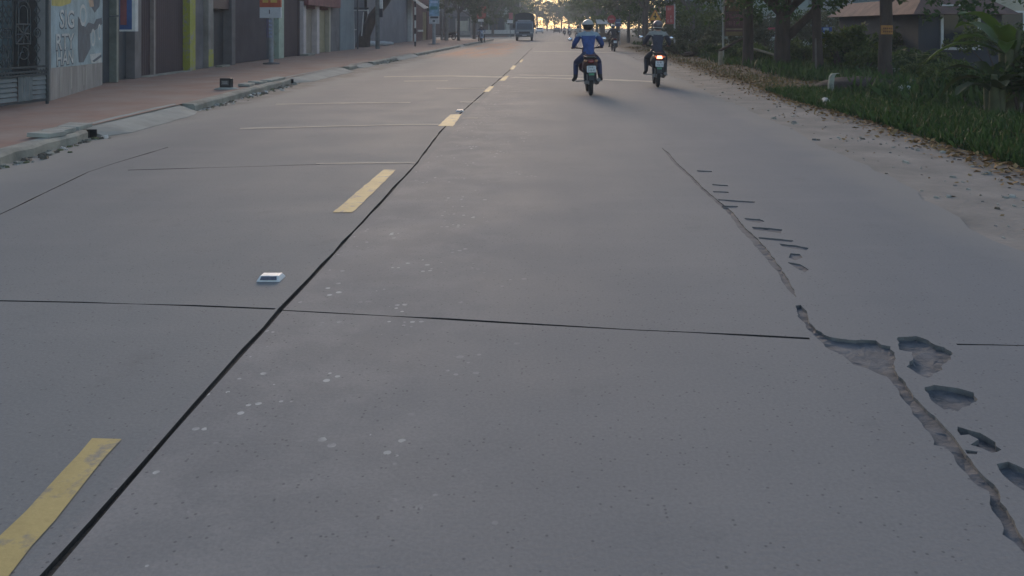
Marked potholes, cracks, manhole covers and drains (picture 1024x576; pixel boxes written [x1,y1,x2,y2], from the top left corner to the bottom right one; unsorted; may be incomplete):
pothole [997,462,1024,490]
pothole [957,427,1001,453]
pothole [897,336,953,377]
pothole [925,385,977,412]
crack [662,148,1024,552]
